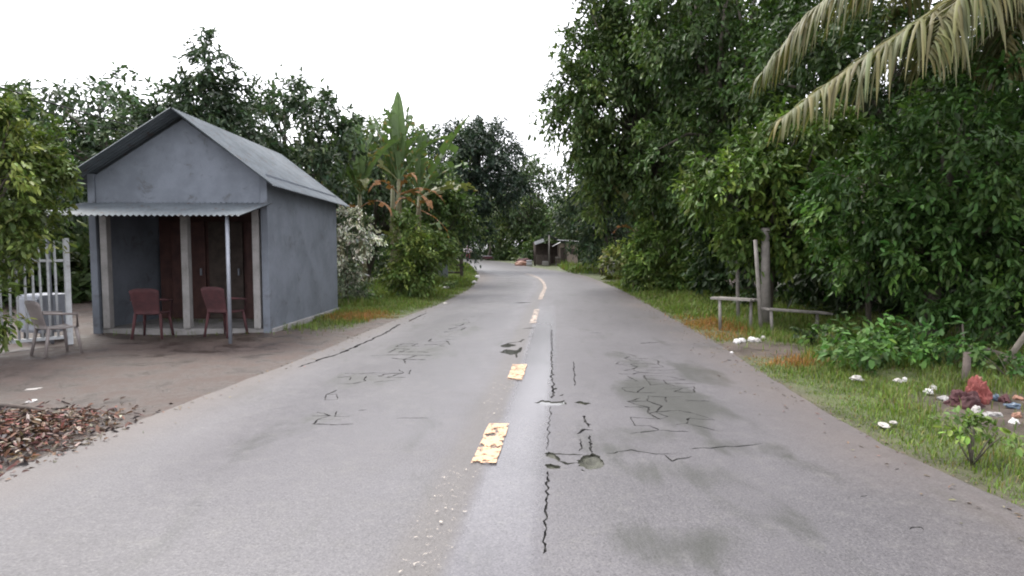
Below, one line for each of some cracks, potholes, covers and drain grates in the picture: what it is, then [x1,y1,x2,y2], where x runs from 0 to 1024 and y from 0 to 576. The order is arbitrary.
pothole [535,388,567,406]
pothole [501,339,525,358]
crack [542,330,555,554]
pothole [544,451,604,471]
crack [573,342,763,461]
crack [300,313,465,425]
